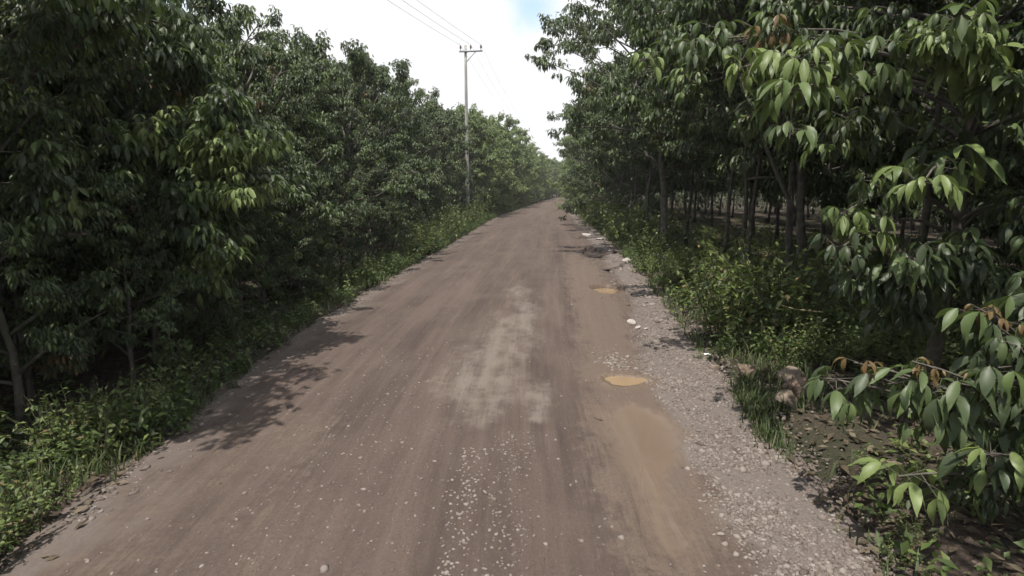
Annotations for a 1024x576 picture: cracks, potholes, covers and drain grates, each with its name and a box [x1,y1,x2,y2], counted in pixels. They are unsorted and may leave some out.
pothole [580,283,637,296]
pothole [584,369,666,394]
pothole [576,247,610,259]
